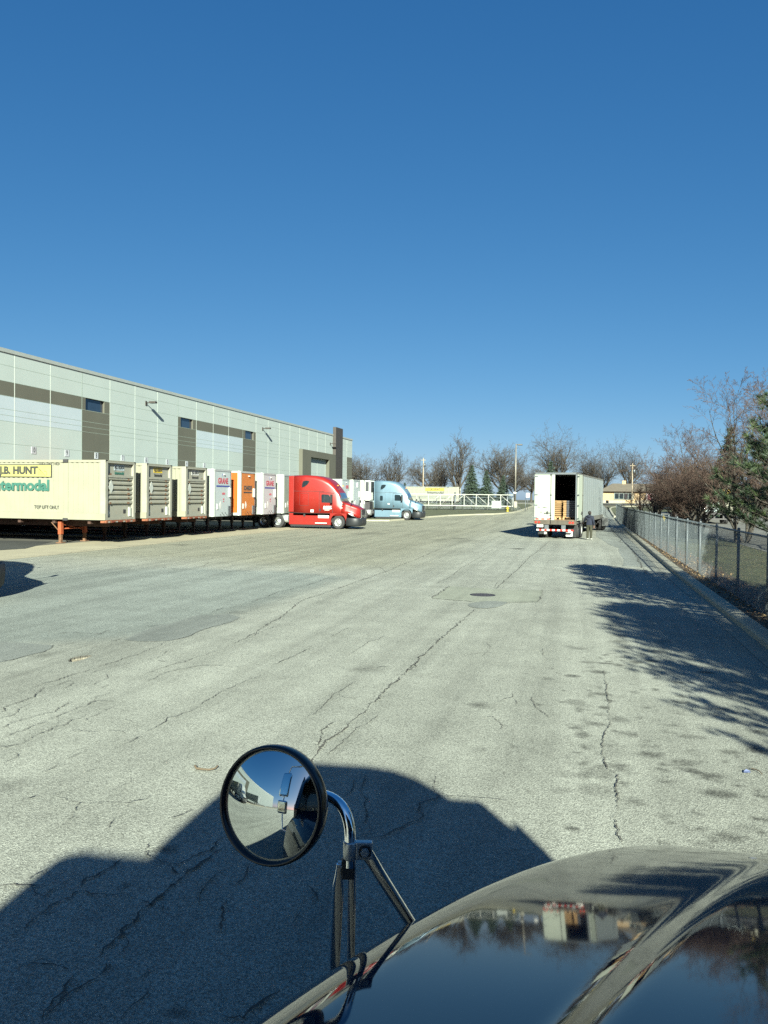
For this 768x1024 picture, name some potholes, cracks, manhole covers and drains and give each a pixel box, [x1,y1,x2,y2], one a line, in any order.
crack [601,670,623,842]
crack [2,543,480,760]
